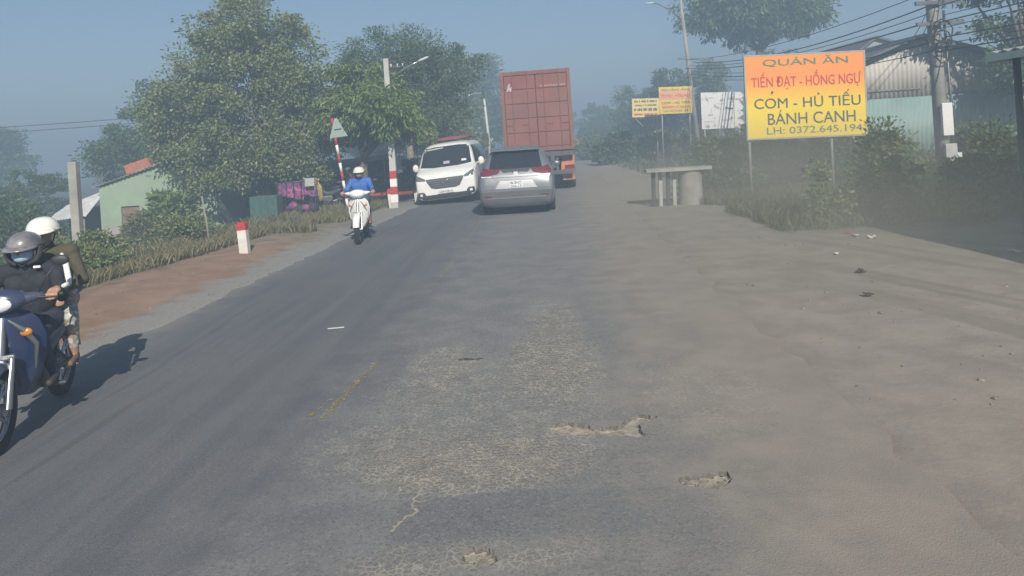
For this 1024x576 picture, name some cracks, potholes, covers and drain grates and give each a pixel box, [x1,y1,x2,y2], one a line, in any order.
pothole [461,547,498,567]
pothole [545,414,657,438]
crack [371,333,486,417]
crack [320,410,596,576]
pothole [676,471,733,489]
crack [501,307,602,410]
